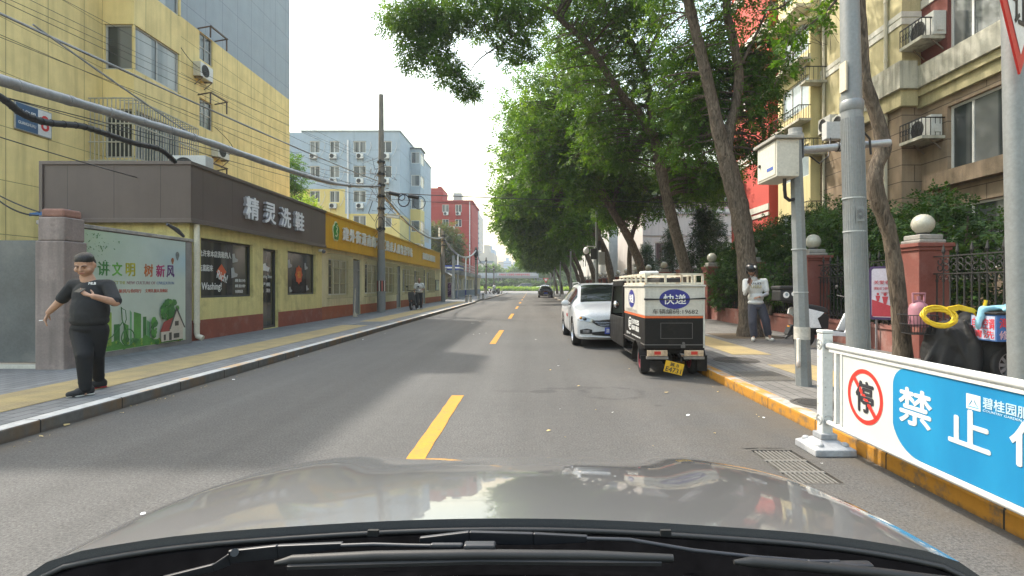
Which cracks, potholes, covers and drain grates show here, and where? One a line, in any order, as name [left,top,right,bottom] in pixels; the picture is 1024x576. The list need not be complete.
drain grate [749,450,847,484]
manhole cover [790,398,834,409]
